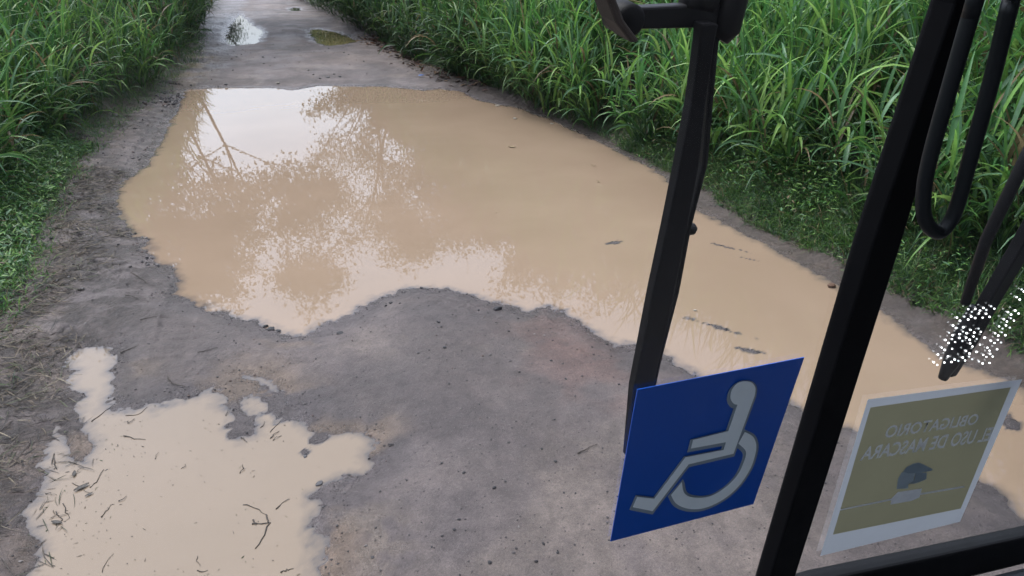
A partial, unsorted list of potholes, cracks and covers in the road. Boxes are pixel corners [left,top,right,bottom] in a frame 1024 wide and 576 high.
pothole [217,12,270,46]
pothole [302,27,361,46]
